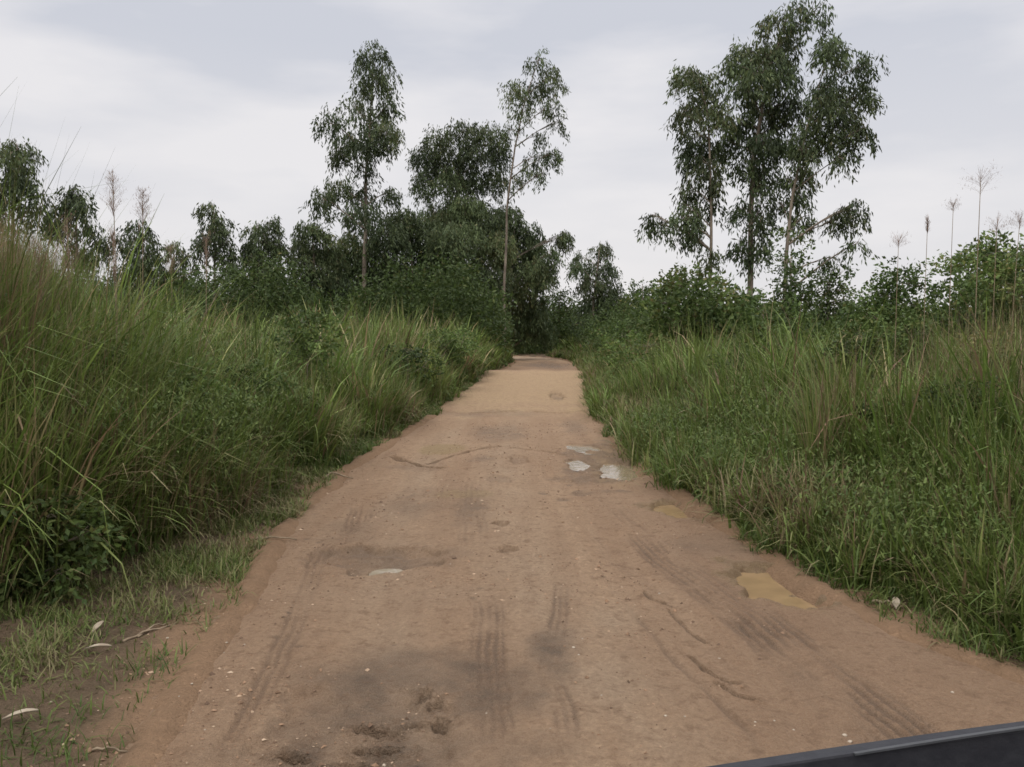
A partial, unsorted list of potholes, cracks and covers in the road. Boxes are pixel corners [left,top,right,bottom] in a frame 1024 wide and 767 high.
crack [387,445,565,469]
pothole [711,556,842,612]
pothole [545,391,570,402]
pothole [494,544,521,553]
pothole [547,430,637,496]
crack [641,590,766,703]
pothole [634,498,706,520]
pothole [290,538,461,577]
